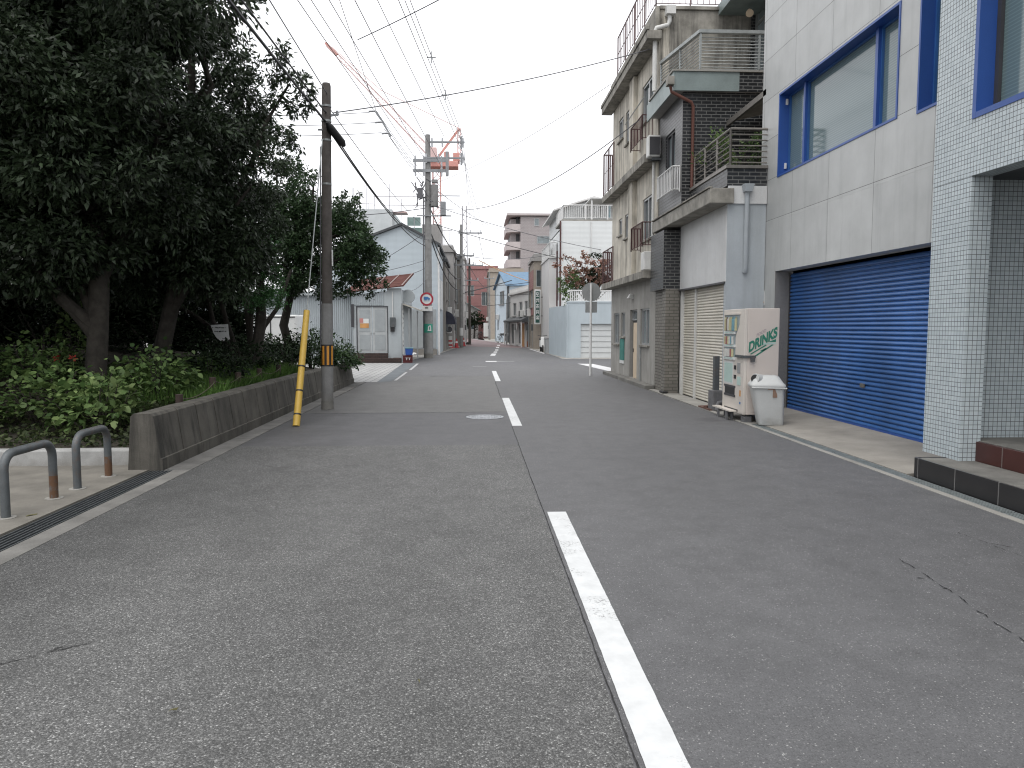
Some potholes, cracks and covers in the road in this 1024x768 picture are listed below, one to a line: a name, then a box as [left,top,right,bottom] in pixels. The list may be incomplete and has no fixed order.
crack [900,559,1024,641]
drain grate [0,469,173,552]
